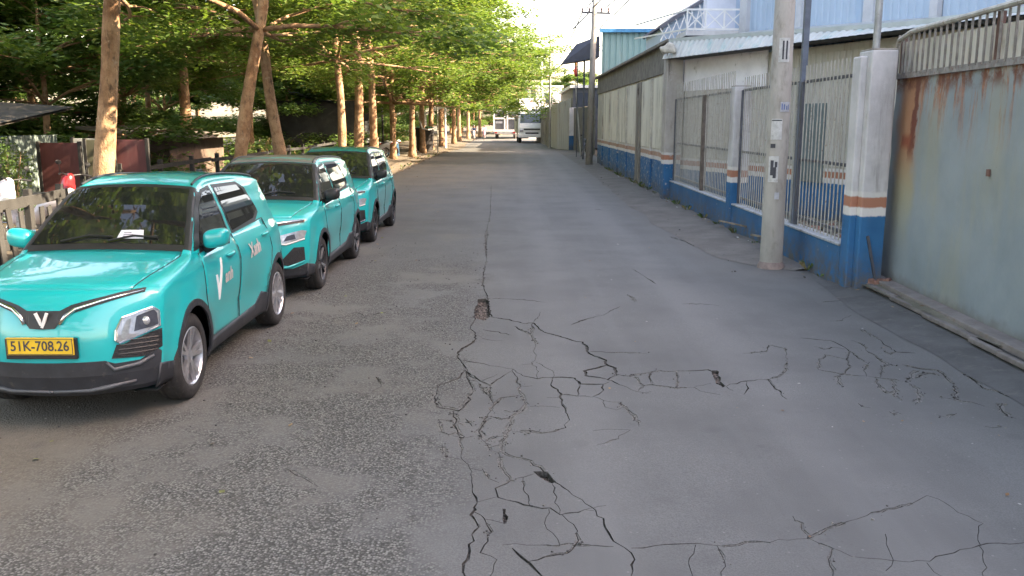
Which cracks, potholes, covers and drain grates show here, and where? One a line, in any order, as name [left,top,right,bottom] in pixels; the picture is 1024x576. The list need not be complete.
pothole [473,299,490,321]
pothole [533,471,556,483]
crack [456,200,1020,576]
